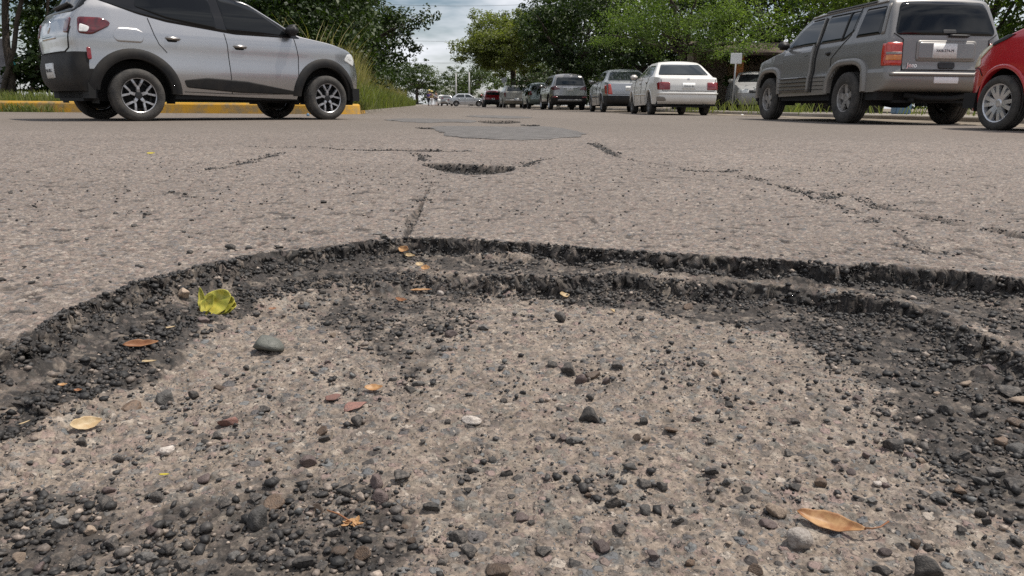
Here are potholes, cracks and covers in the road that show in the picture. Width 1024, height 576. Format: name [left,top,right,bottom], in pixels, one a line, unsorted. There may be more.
crack [113,120,1024,270]
pothole [0,236,1024,576]
pothole [420,162,518,175]
